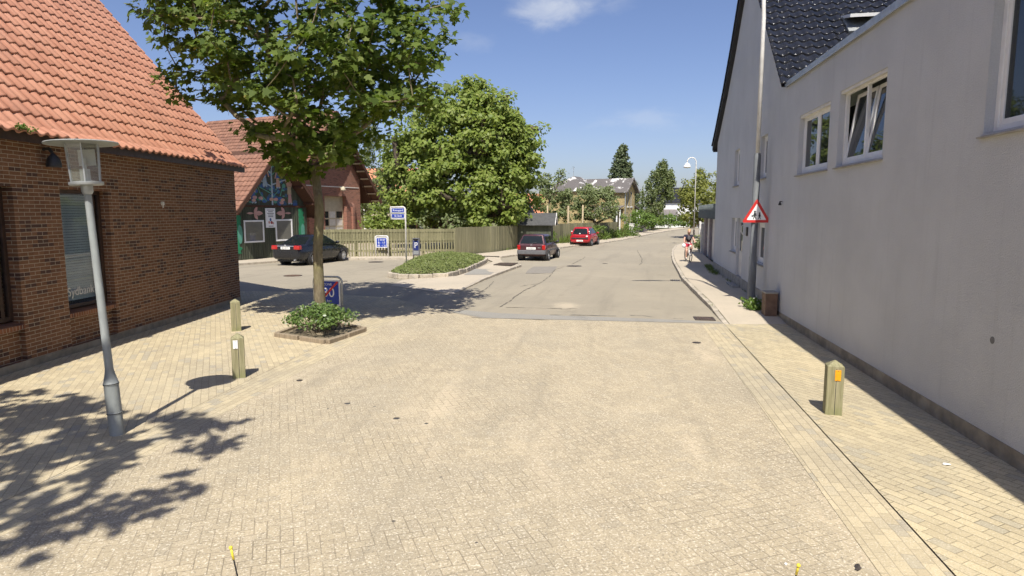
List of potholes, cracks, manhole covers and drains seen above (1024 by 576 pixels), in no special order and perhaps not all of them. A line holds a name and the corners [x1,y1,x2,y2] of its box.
crack [471,257,585,309]
